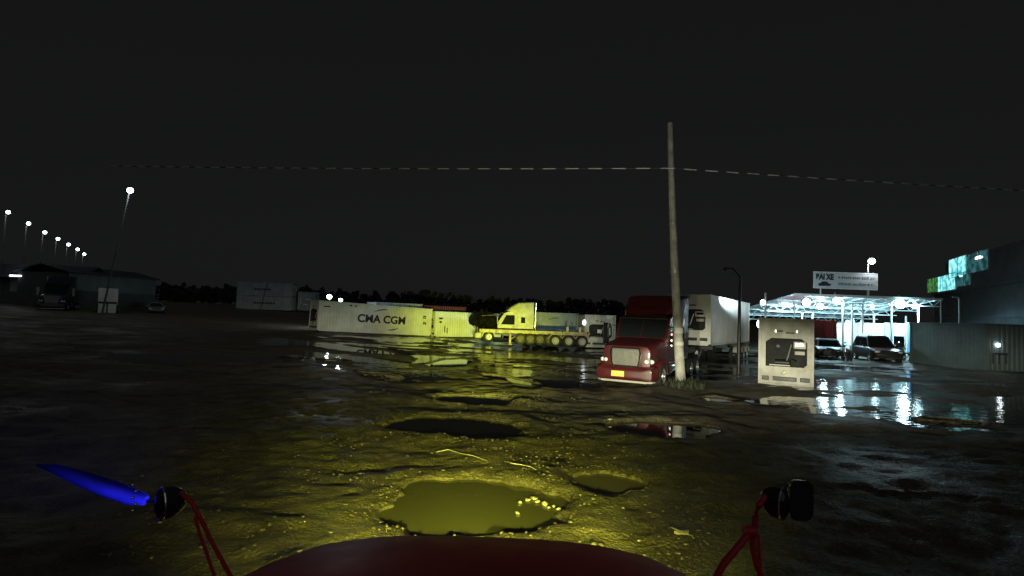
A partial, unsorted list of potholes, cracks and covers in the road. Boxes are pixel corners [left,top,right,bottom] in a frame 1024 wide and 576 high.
pothole [370,474,575,537]
pothole [375,414,531,438]
pothole [426,393,516,406]
pothole [597,419,726,439]
pothole [570,469,652,496]
